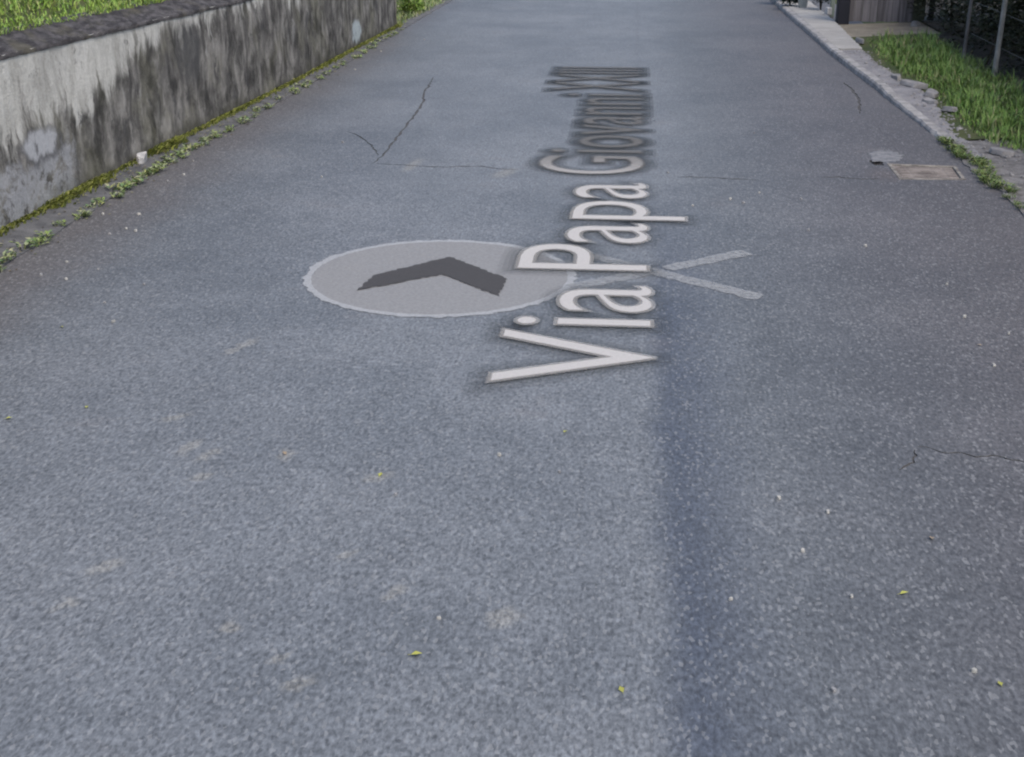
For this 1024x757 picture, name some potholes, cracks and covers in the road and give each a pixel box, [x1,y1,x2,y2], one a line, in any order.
crack [900,446,1024,470]
crack [844,83,861,113]
manhole cover [887,163,966,180]
crack [350,78,516,170]
